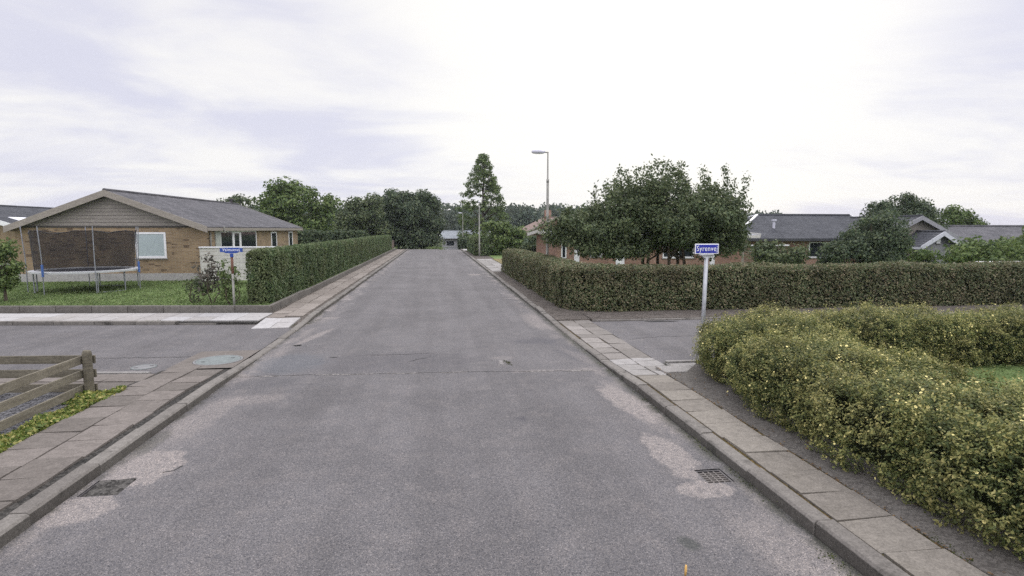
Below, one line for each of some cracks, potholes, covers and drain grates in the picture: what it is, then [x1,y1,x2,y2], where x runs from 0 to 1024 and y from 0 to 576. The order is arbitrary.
drain grate [695,469,733,483]
manhole cover [193,355,243,365]
drain grate [79,477,137,497]
